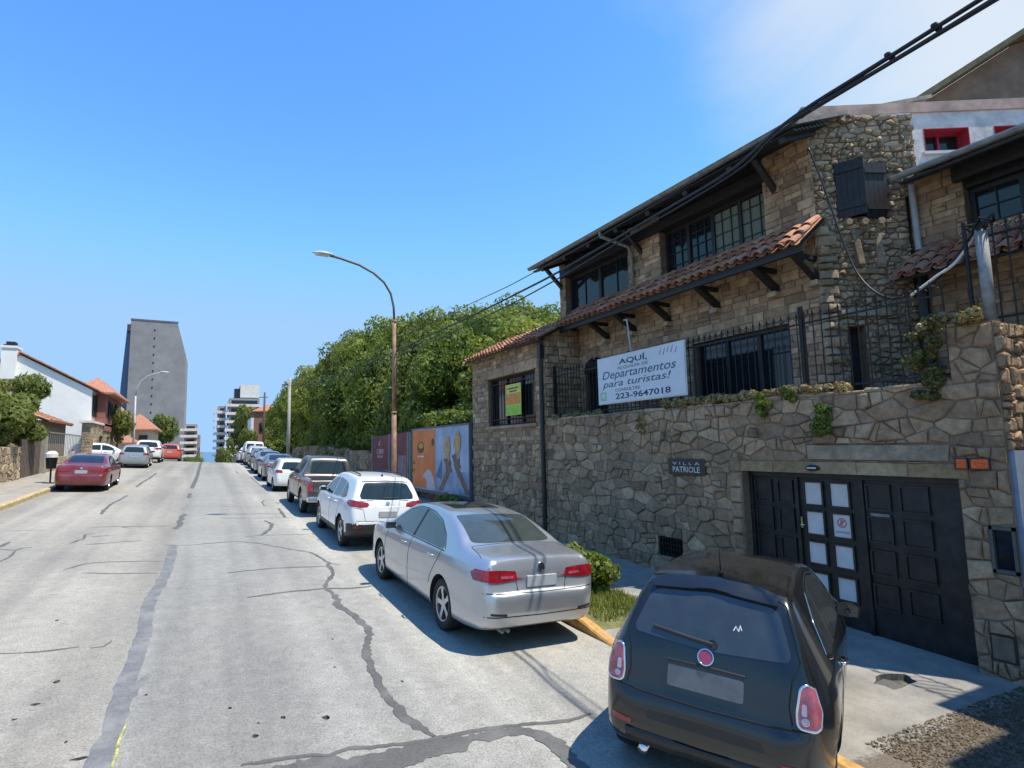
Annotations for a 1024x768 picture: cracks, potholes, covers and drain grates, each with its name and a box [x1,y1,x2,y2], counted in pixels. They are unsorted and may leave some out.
crack [172,462,435,737]
crack [64,561,156,574]
crack [0,541,32,561]
crack [0,640,112,654]
crack [71,473,157,545]
